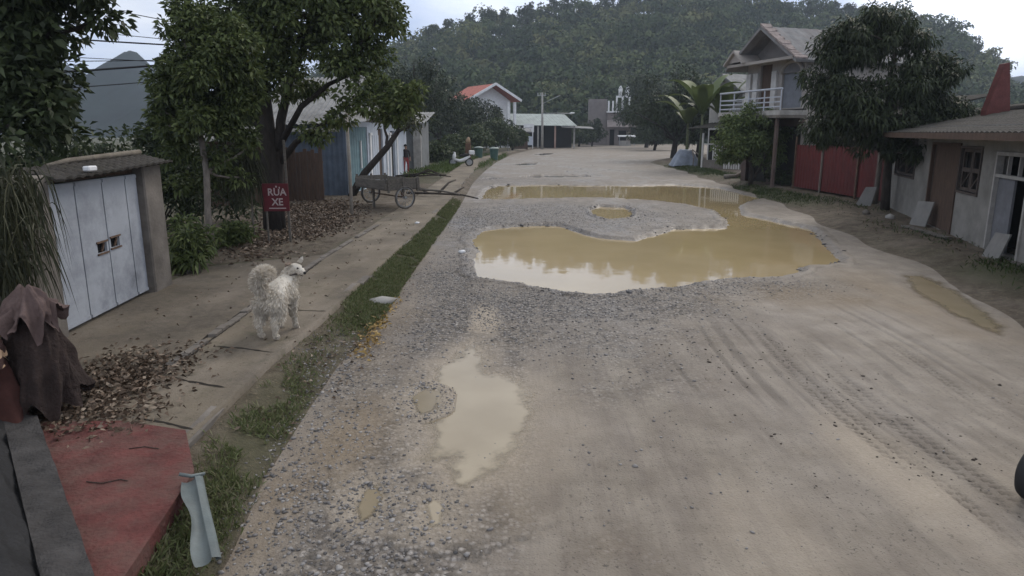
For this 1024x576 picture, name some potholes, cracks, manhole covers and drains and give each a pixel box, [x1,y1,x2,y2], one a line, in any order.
pothole [869,268,1024,348]
pothole [455,183,857,298]
